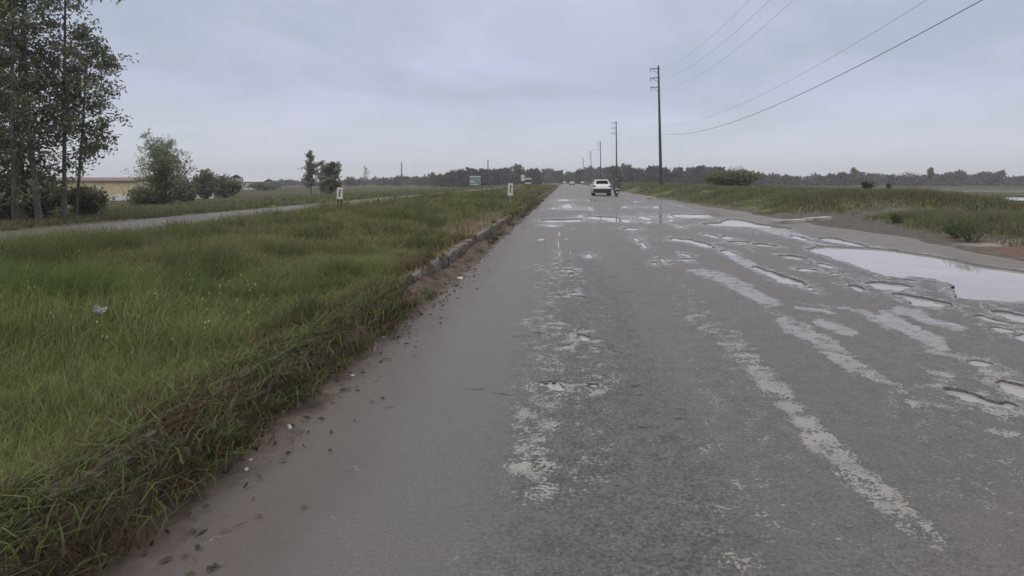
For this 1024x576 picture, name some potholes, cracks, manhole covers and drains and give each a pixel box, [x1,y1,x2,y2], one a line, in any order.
pothole [670,237,716,248]
pothole [891,293,953,307]
pothole [537,380,565,391]
pothole [752,265,807,285]
pothole [807,245,1024,302]
pothole [995,379,1024,398]
pothole [943,386,1018,409]
pothole [702,219,792,230]
